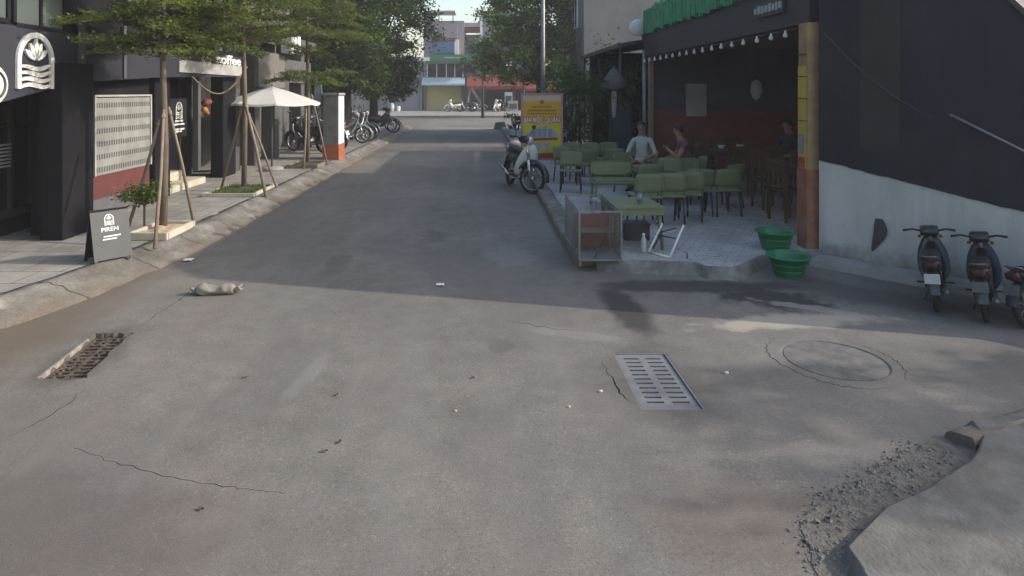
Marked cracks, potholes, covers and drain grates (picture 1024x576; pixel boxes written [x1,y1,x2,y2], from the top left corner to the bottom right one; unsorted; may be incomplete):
manhole cover [781,340,892,381]
crack [76,448,283,494]
drain grate [36,332,133,380]
drain grate [613,353,706,410]
